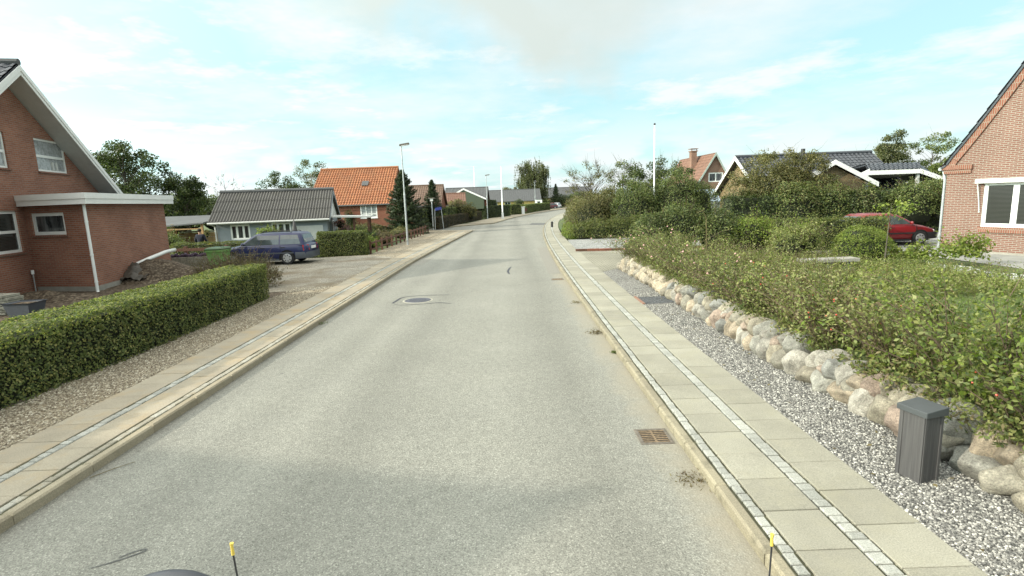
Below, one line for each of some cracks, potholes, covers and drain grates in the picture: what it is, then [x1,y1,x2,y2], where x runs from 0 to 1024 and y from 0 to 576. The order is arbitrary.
drain grate [633,428,675,445]
crack [88,548,147,569]
